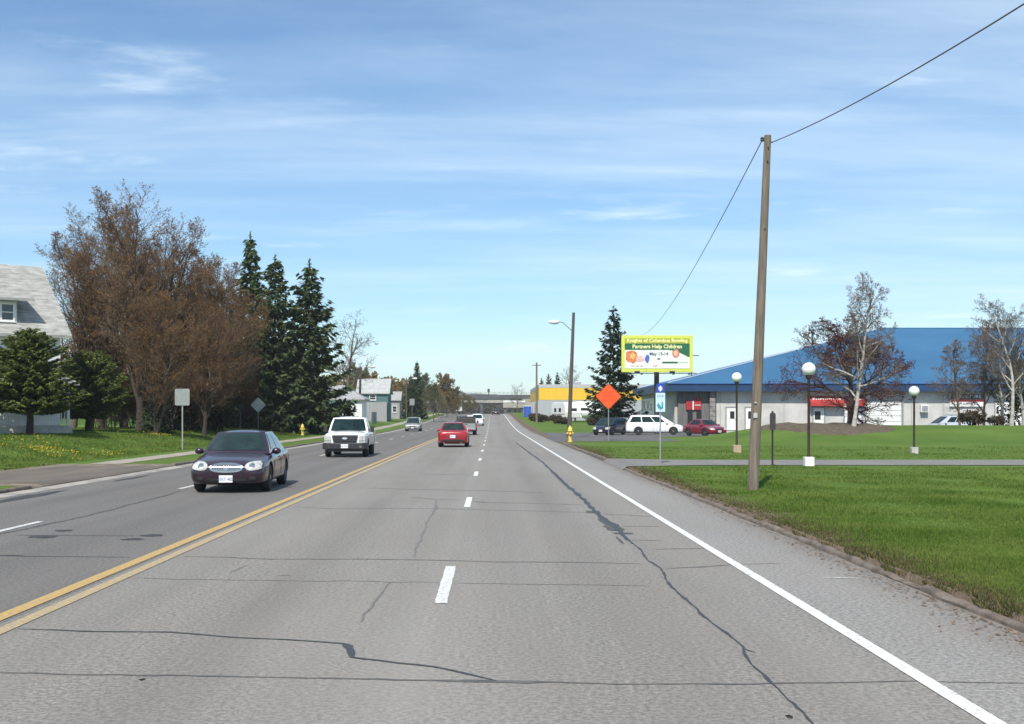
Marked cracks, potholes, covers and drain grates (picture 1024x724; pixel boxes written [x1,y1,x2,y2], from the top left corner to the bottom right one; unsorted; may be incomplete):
crack [0,442,1010,724]
